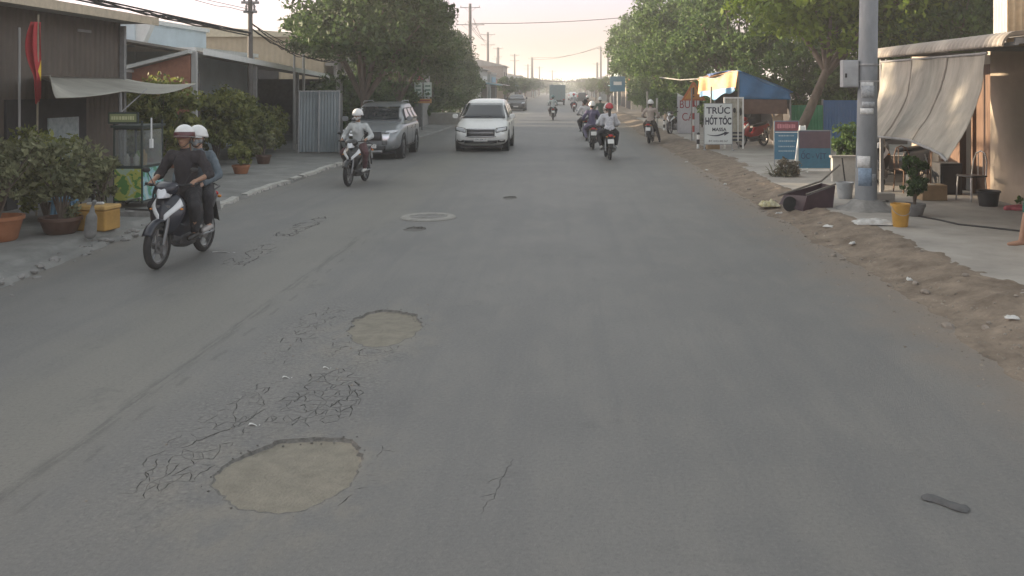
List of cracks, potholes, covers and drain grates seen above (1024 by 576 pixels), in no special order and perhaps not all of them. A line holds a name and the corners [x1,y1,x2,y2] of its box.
manhole cover [400,212,456,222]
crack [223,217,326,266]
crack [122,381,280,498]
crack [274,308,398,363]
crack [265,368,364,426]
